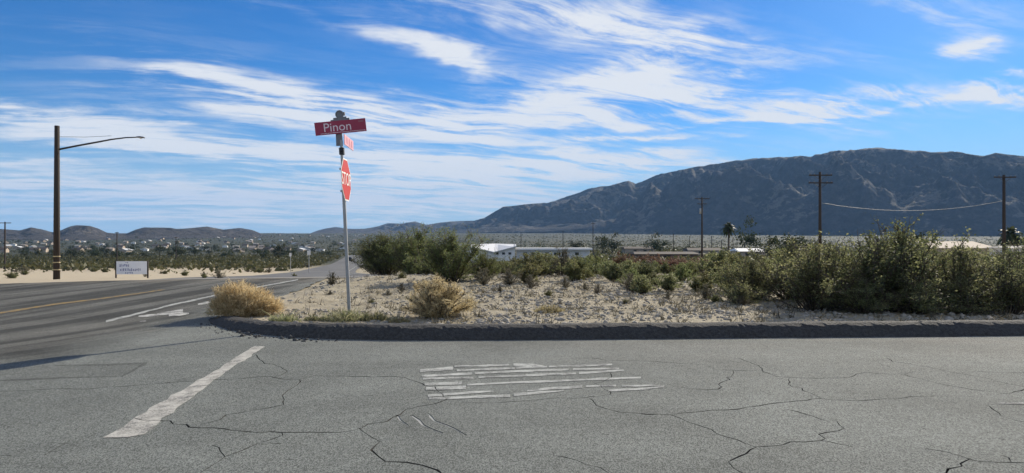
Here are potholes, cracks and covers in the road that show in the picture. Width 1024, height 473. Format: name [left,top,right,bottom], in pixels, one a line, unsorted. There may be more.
crack [21,354,447,473]
crack [497,358,1024,473]
